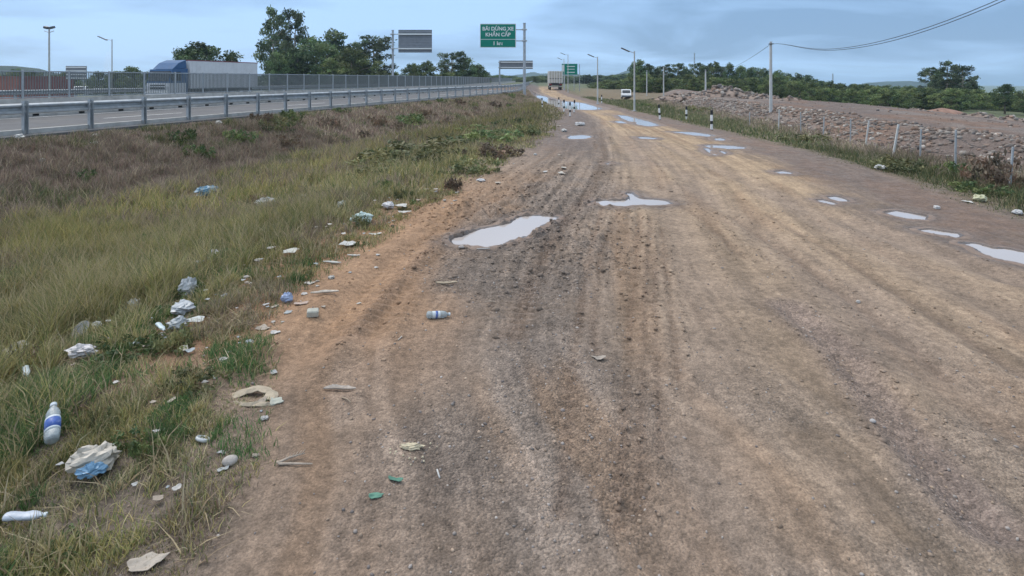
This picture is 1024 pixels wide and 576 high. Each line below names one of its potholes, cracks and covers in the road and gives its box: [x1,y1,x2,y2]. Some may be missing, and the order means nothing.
pothole [614,115,667,127]
pothole [443,210,566,250]
pothole [808,198,845,206]
pothole [949,240,1024,267]
pothole [582,191,679,208]
pothole [909,227,974,240]
pothole [820,195,857,203]
pothole [875,209,937,222]
